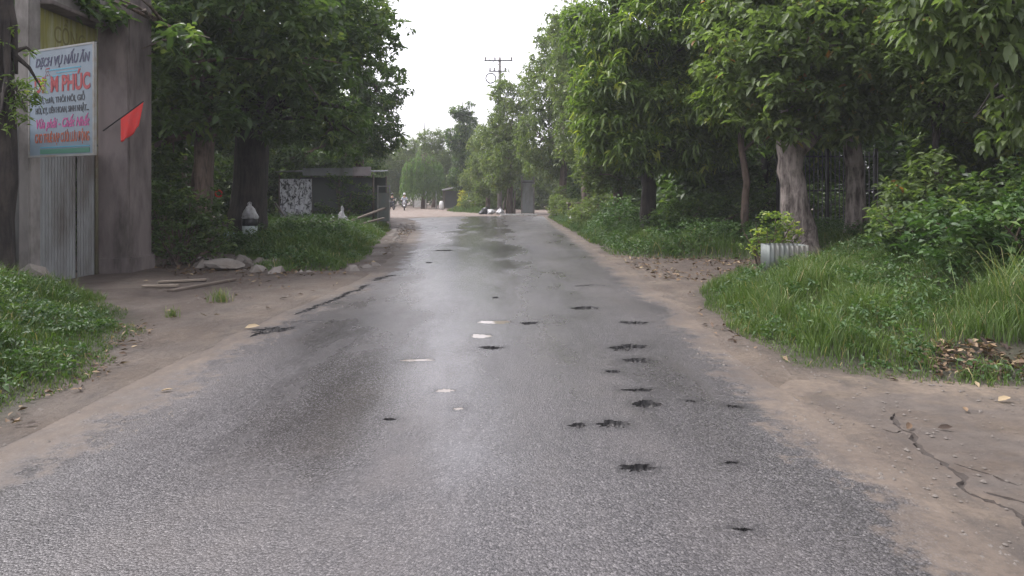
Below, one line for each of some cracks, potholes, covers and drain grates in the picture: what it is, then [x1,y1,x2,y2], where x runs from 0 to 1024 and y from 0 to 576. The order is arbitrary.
crack [294,275,395,322]
pothole [632,399,663,408]
pothole [619,464,657,472]
pothole [596,419,631,428]
pothole [250,326,297,337]
